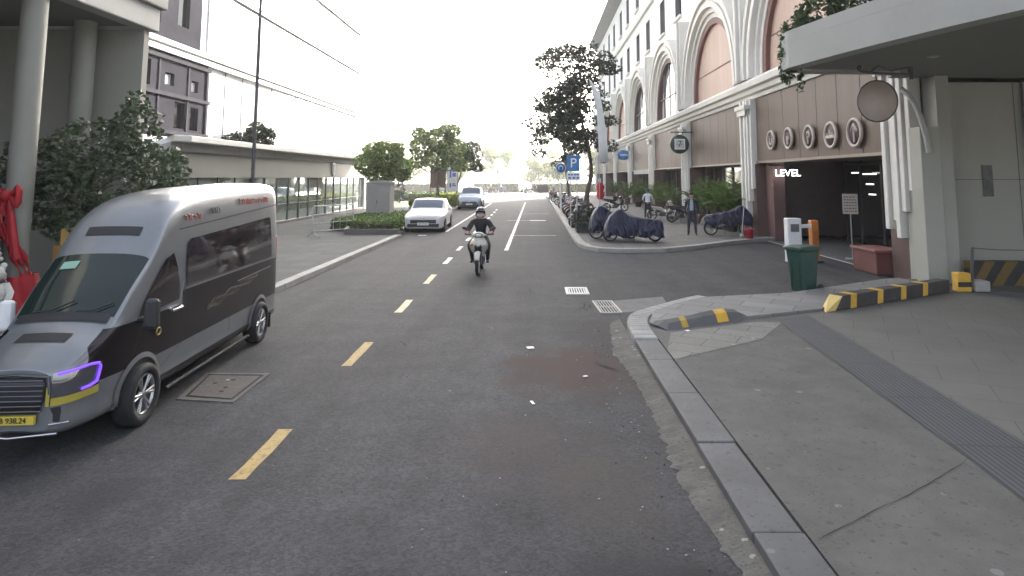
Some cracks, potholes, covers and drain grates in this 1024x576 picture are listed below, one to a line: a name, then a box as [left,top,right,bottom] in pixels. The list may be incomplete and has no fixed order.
drain grate [592,300,623,314]
manhole cover [176,373,271,403]
drain grate [565,287,590,295]
